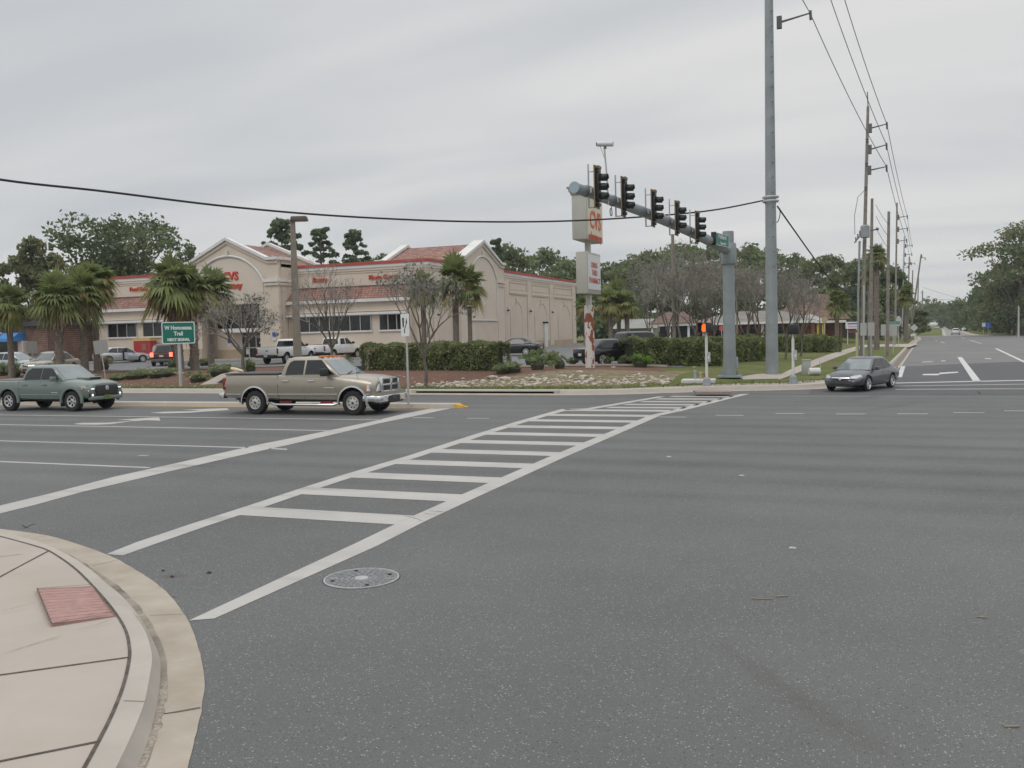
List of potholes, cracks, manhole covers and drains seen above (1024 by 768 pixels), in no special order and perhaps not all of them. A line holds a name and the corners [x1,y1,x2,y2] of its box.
manhole cover [322,568,400,589]
